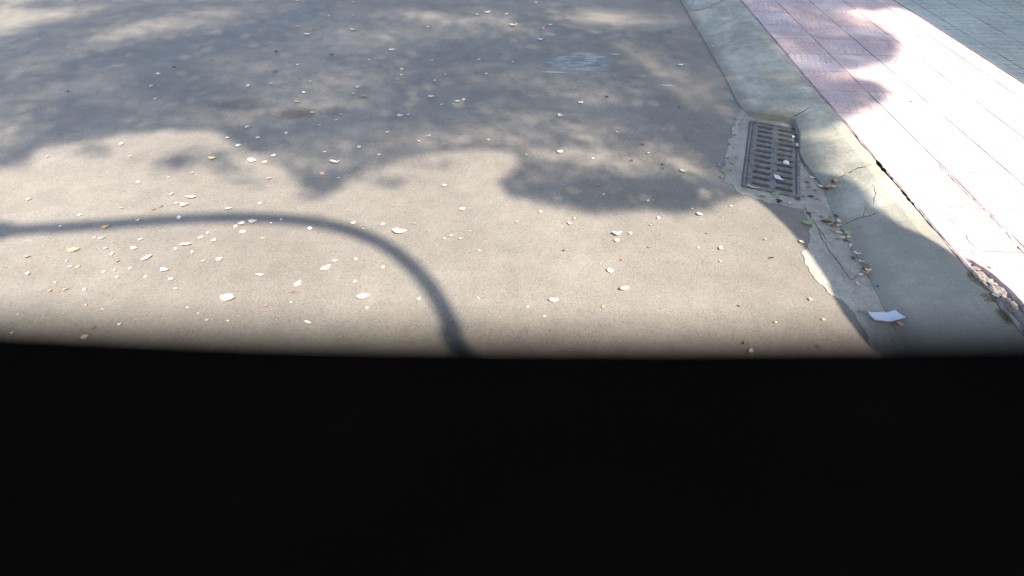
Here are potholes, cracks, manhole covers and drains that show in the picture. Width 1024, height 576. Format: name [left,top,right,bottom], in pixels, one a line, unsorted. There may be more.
drain grate [741,120,800,199]
